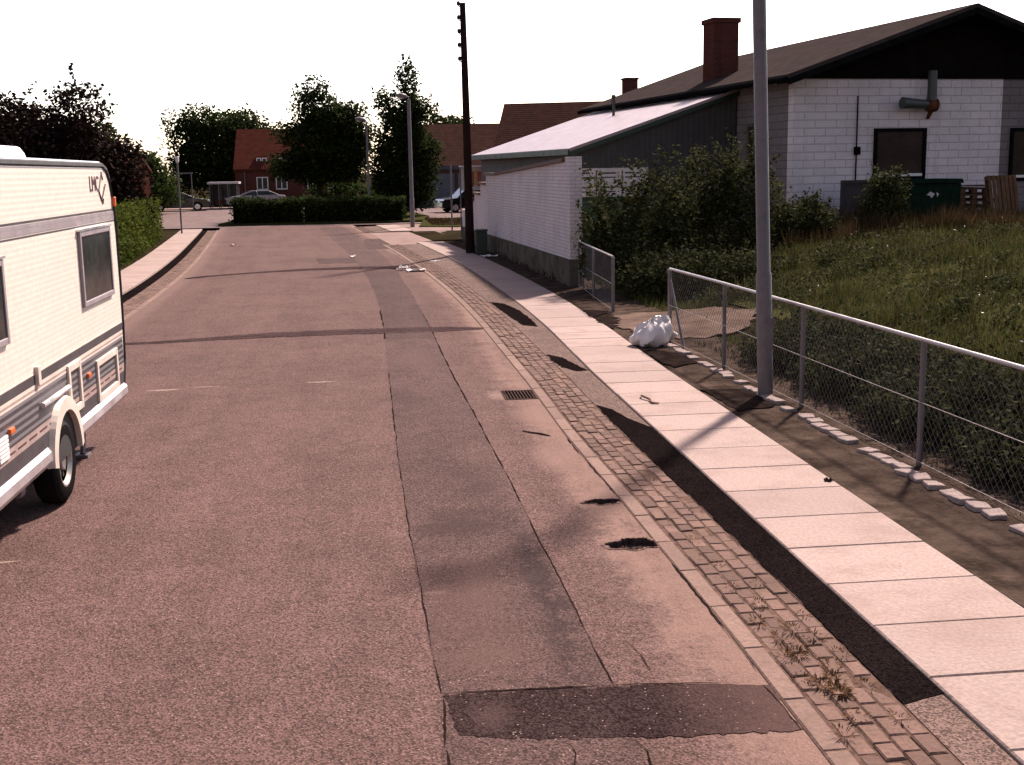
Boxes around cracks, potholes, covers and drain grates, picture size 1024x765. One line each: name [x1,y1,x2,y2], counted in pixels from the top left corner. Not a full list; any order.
pothole [601,537,660,551]
drain grate [501,390,539,400]
